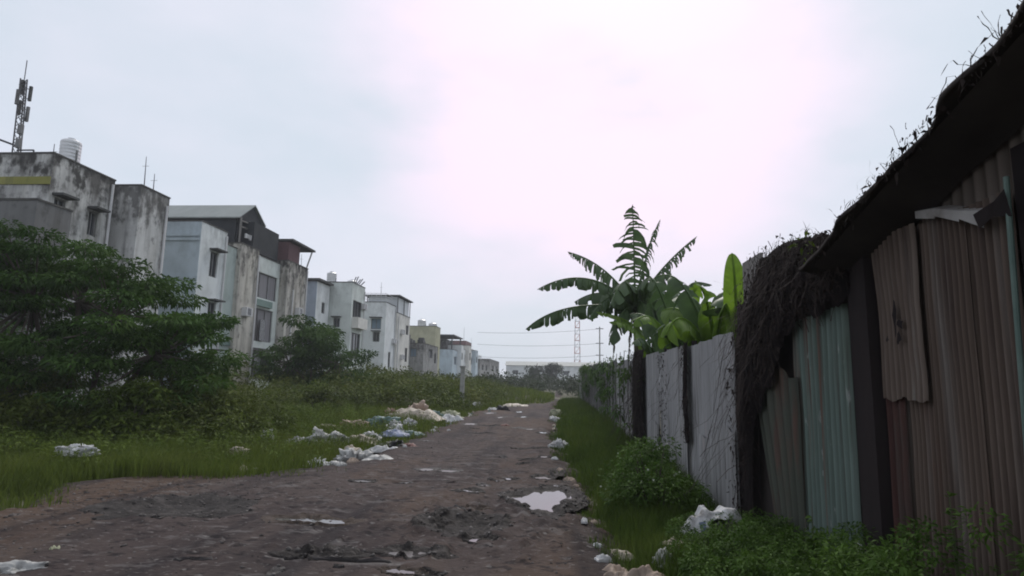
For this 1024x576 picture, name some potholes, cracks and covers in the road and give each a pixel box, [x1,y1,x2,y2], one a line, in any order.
pothole [498,485,590,520]
